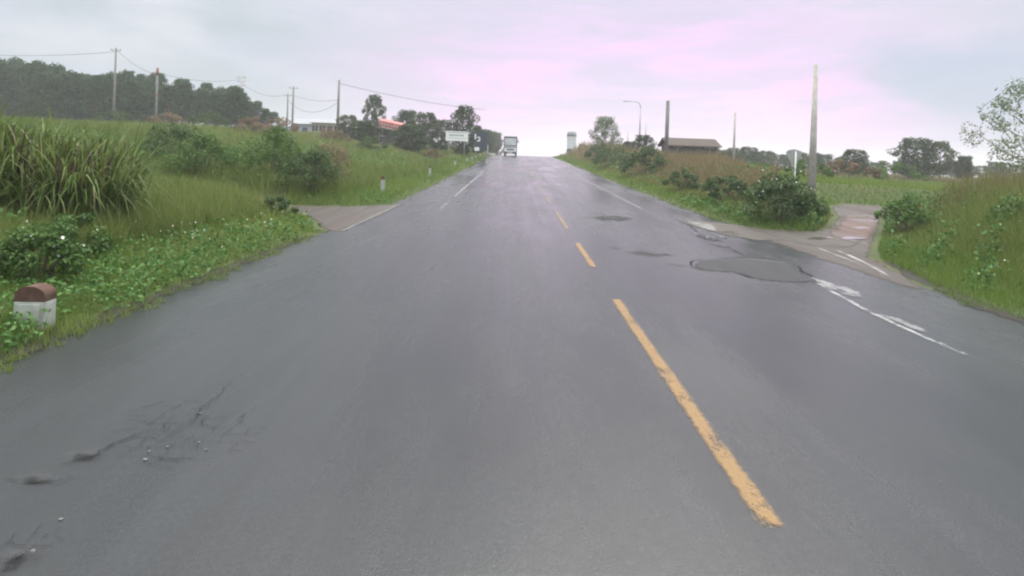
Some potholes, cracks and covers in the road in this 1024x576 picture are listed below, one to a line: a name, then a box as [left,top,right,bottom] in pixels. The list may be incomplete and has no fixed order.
crack [67,431,143,462]
